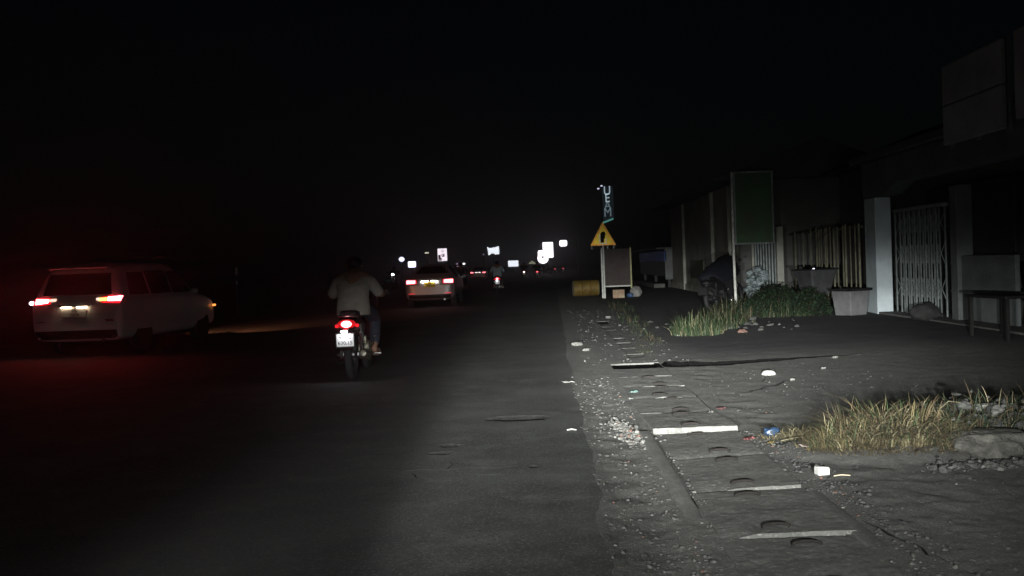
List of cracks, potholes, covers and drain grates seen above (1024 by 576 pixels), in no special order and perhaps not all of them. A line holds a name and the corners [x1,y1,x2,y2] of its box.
crack [658,355,849,394]
crack [860,519,955,565]
